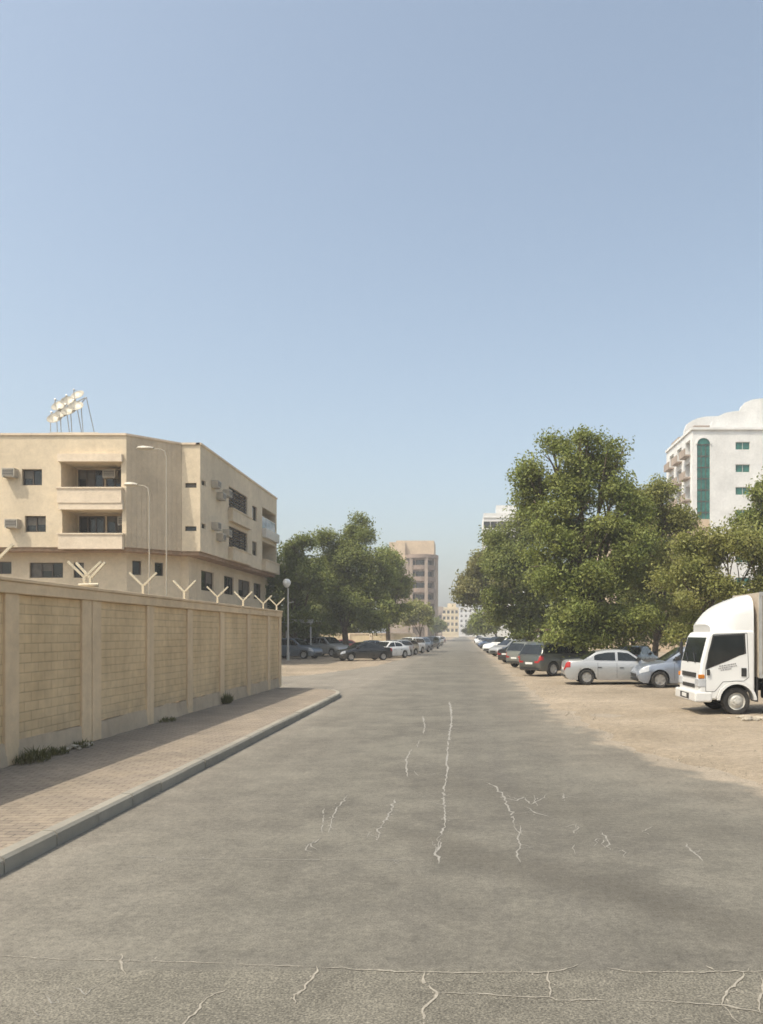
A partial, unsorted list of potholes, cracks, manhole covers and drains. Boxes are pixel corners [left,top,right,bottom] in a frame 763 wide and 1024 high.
crack [12,955,763,1024]
crack [405,702,462,863]
crack [126,796,401,868]
crack [489,783,549,862]
crack [567,824,626,858]
